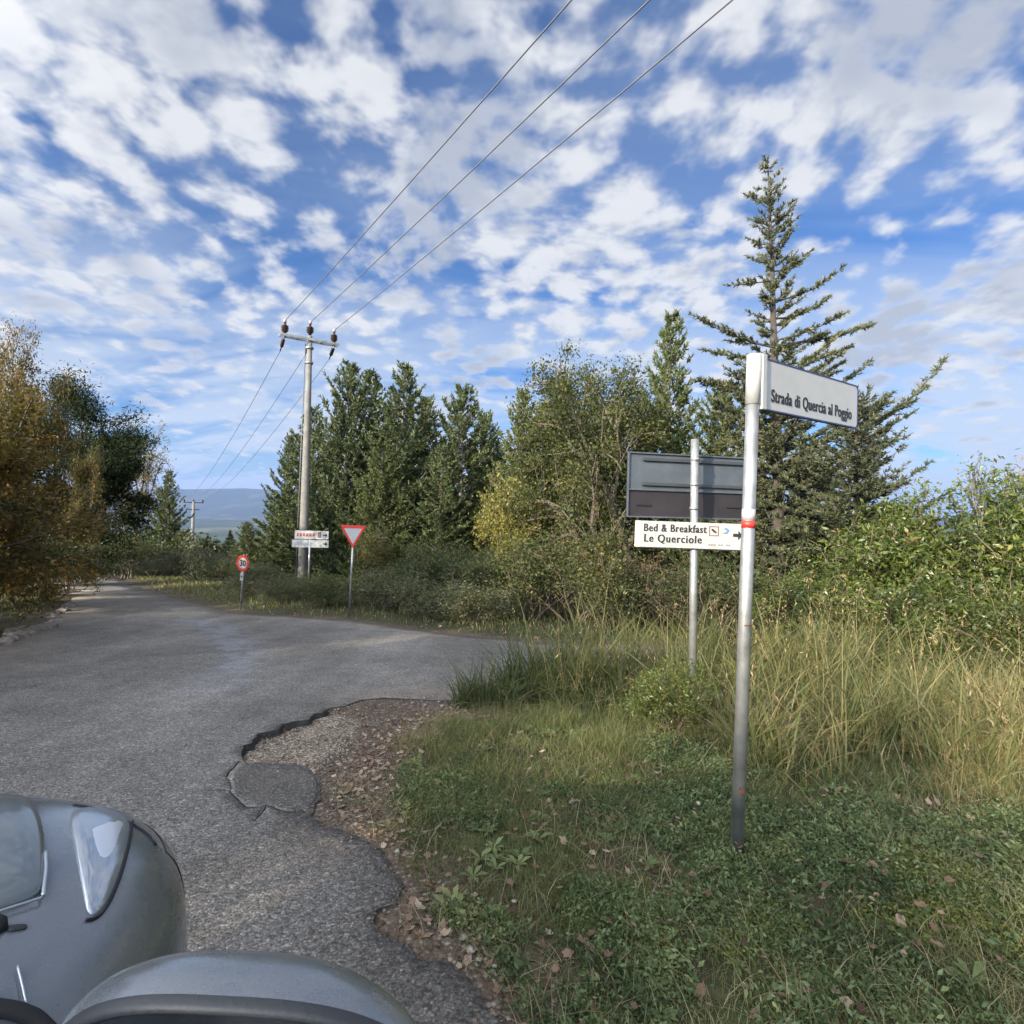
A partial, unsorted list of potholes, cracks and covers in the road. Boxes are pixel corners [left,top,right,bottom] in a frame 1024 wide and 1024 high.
pothole [242,701,365,774]
crack [223,762,304,818]
